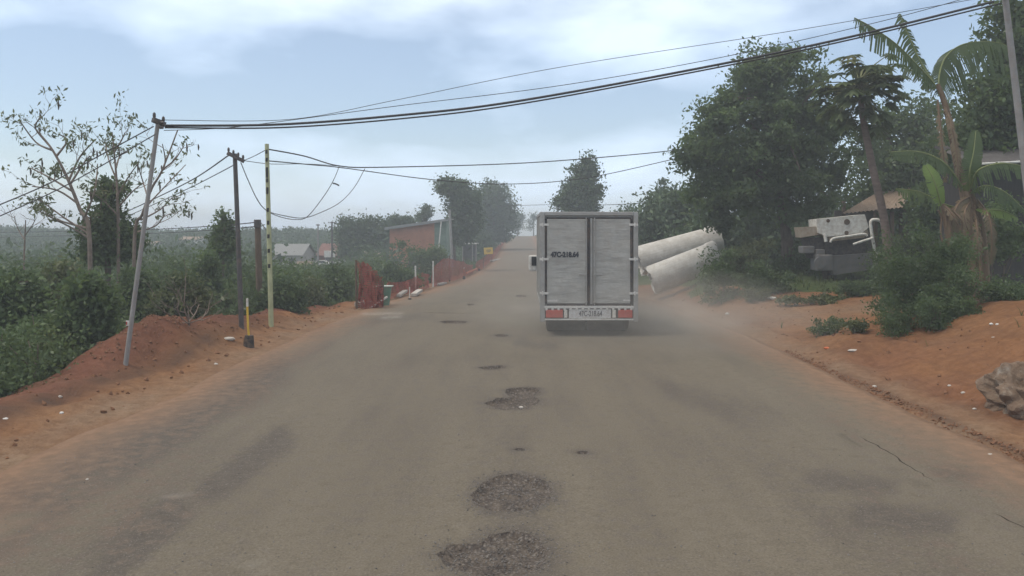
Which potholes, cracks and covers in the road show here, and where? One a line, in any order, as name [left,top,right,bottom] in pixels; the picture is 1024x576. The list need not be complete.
crack [863,438,934,481]
pothole [454,467,561,522]
pothole [481,386,549,414]
pothole [421,522,568,576]
